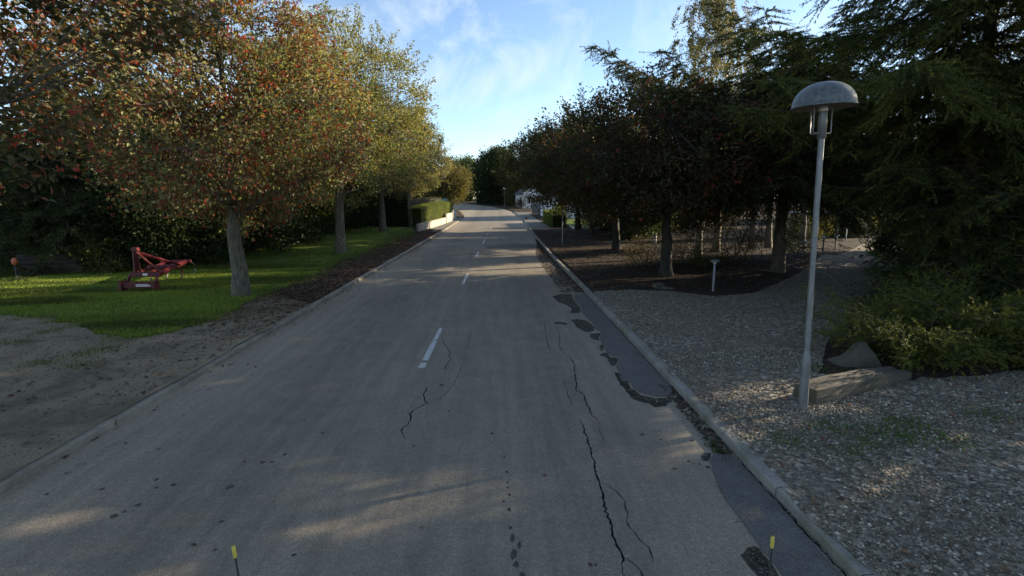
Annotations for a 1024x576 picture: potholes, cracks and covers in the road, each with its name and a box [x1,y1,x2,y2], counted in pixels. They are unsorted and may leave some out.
crack [401,337,463,438]
pothole [740,546,779,576]
crack [544,323,653,576]
